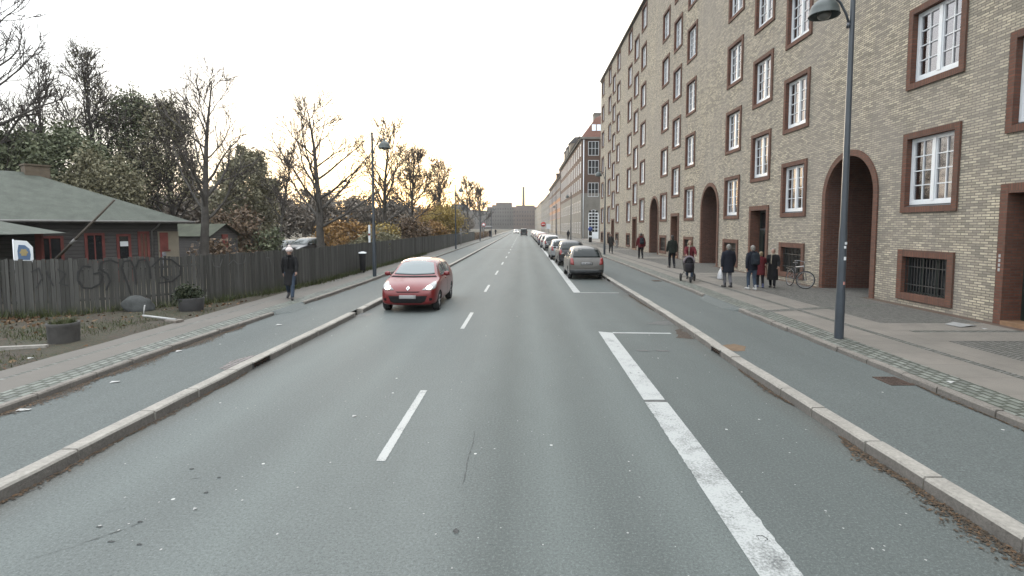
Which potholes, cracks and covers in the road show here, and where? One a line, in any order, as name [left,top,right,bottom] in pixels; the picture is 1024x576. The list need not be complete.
drain grate [873,377,915,386]
drain grate [710,344,729,356]
drain grate [244,353,271,369]
